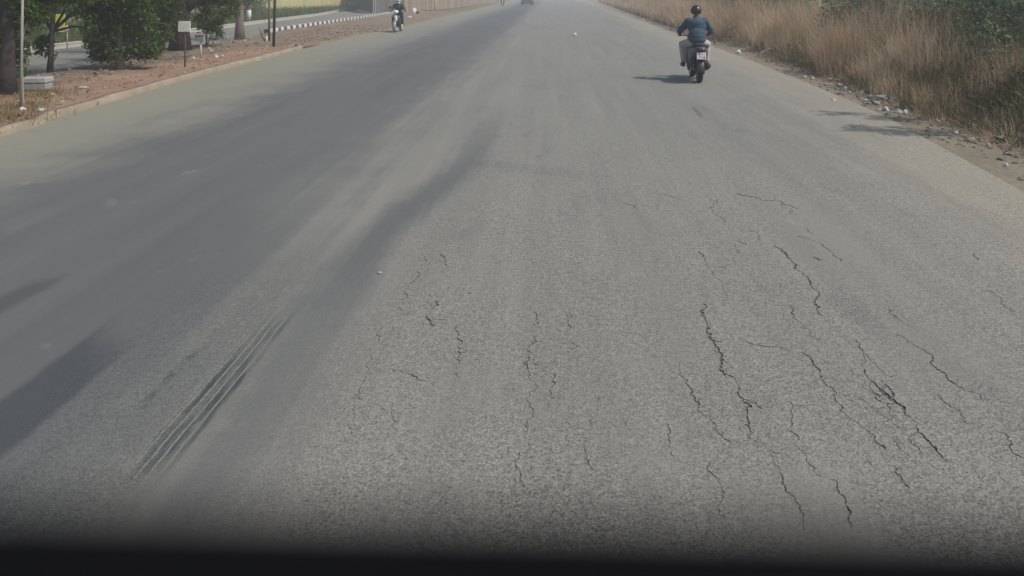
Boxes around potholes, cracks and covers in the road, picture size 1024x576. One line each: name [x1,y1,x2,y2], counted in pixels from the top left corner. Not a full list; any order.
crack [348,253,471,438]
crack [666,194,985,523]
crack [514,301,600,490]
crack [972,430,1021,484]
